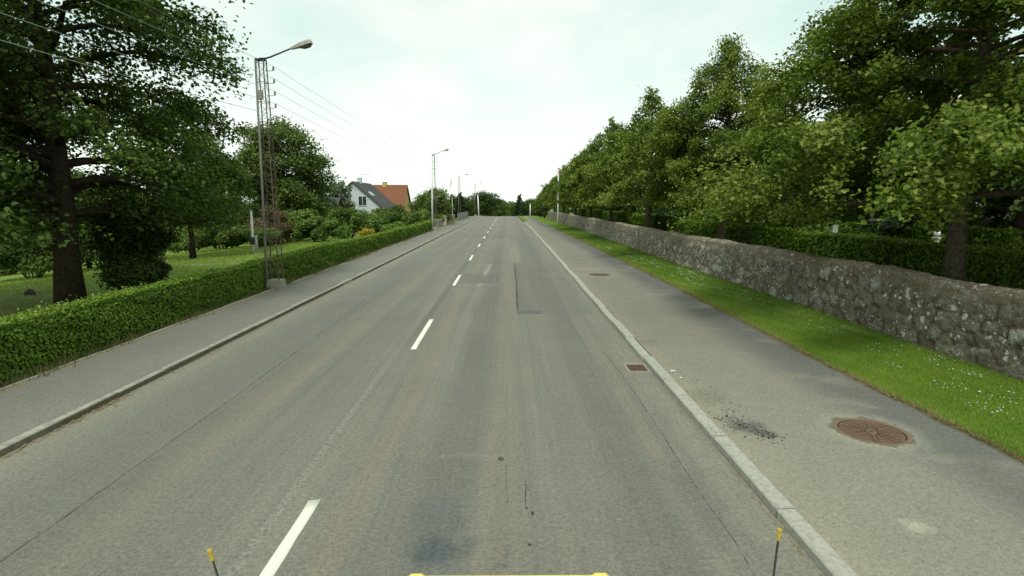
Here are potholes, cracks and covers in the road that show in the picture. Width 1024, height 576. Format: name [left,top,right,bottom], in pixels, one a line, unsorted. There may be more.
manhole cover [833,418,912,445]
drain grate [623,363,651,372]
